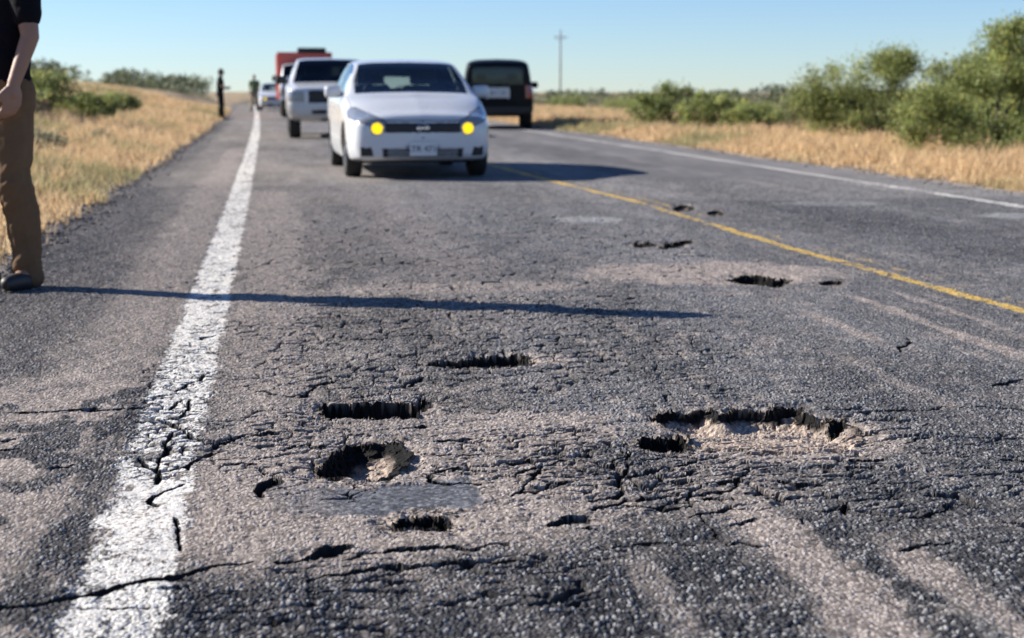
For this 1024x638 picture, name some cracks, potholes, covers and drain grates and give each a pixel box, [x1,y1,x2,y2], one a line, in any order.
crack [424,406,1024,549]
pothole [637,434,693,453]
pothole [390,515,453,532]
crack [902,541,955,552]
pothole [317,399,432,421]
pothole [427,353,533,370]
crack [174,520,182,551]
crack [6,542,636,638]
pothole [311,441,414,483]
pothole [648,406,863,456]
pothole [727,274,792,288]
pothole [658,240,693,250]
